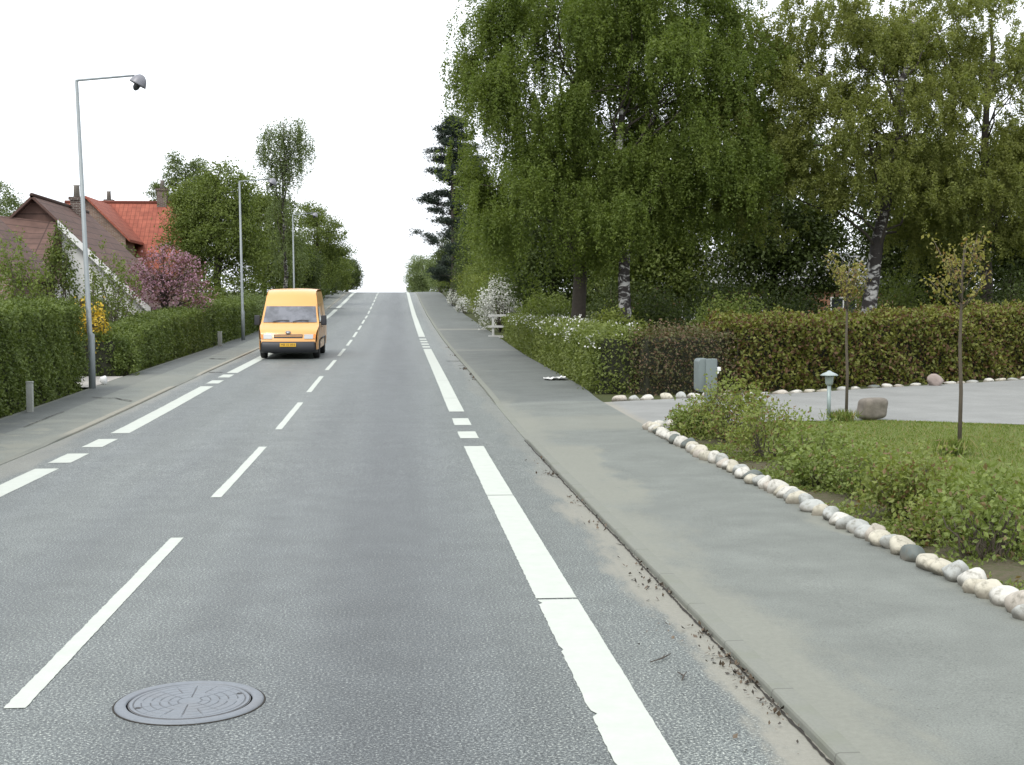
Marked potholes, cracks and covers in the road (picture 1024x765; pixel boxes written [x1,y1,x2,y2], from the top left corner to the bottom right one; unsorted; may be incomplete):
manhole cover [112,681,266,726]
